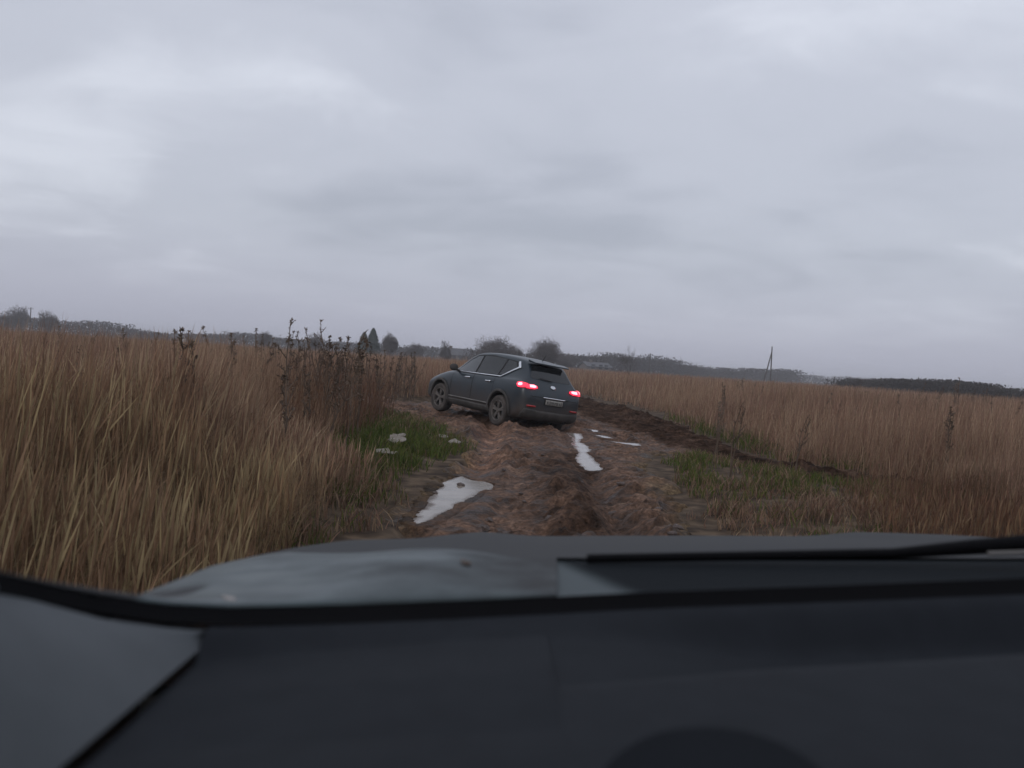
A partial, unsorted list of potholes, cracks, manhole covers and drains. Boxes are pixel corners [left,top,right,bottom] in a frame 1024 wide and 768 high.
pothole [588,433,620,441]
pothole [398,472,506,532]
pothole [560,431,615,476]
